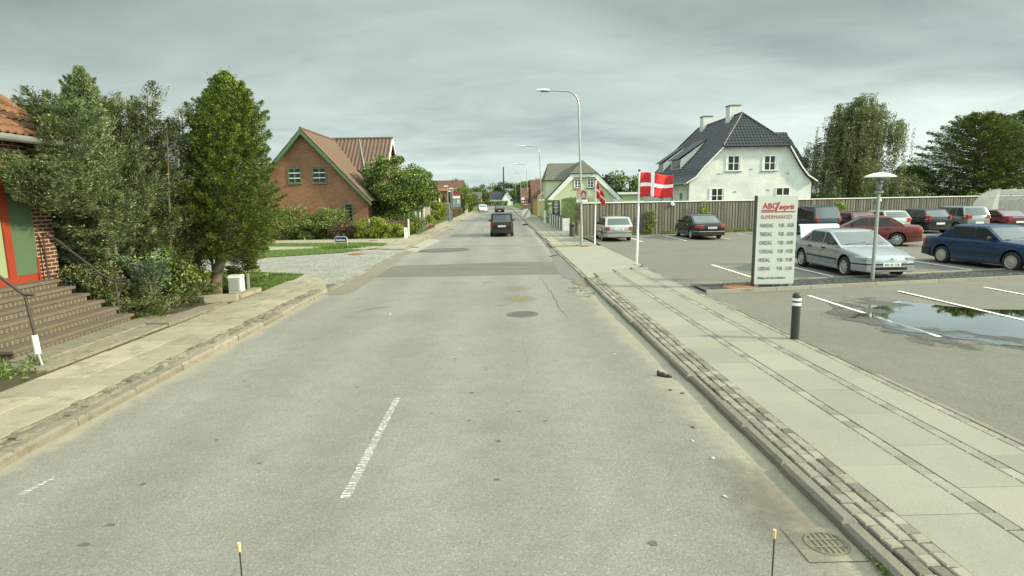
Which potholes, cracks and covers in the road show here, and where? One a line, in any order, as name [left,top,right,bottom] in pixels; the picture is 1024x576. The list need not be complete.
drain grate [781,526,869,562]
